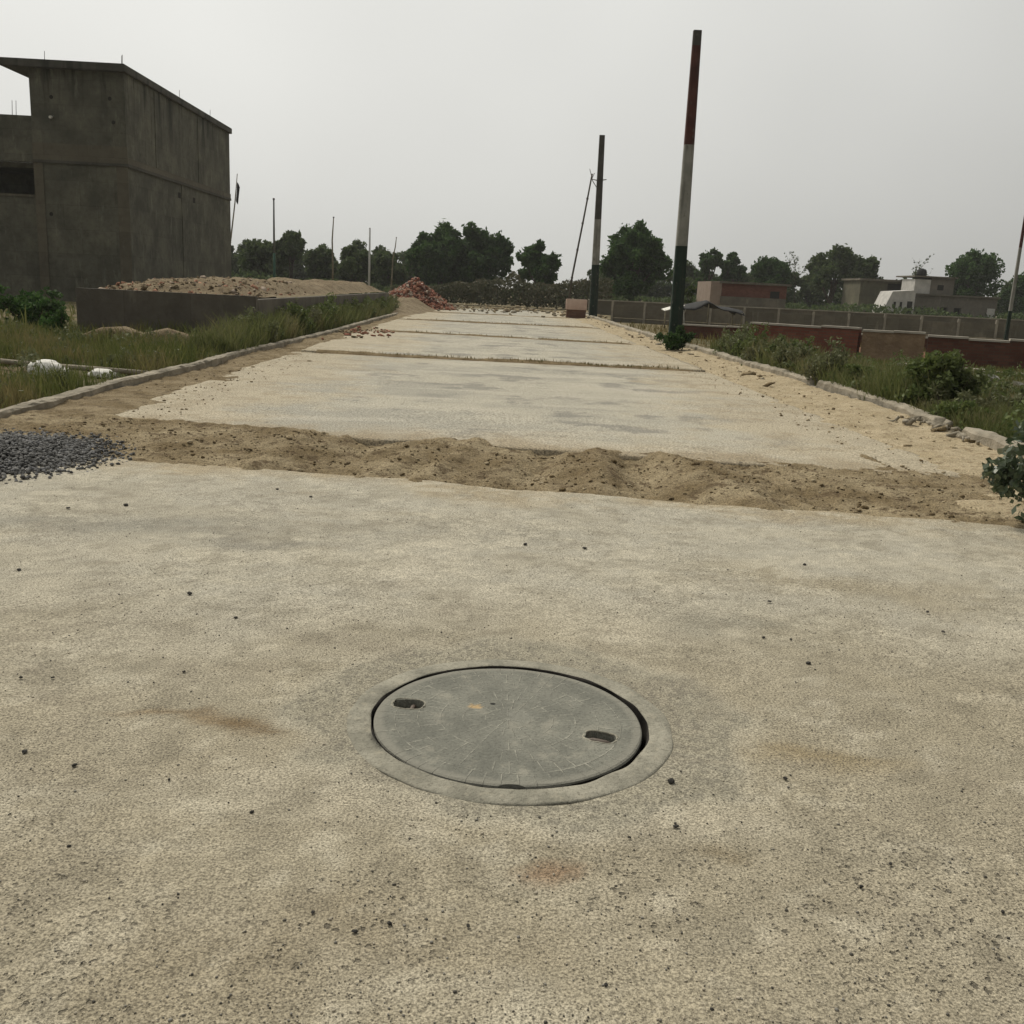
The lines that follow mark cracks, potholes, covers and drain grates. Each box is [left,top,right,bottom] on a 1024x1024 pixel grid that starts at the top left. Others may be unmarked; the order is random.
manhole cover [347,659,673,806]
